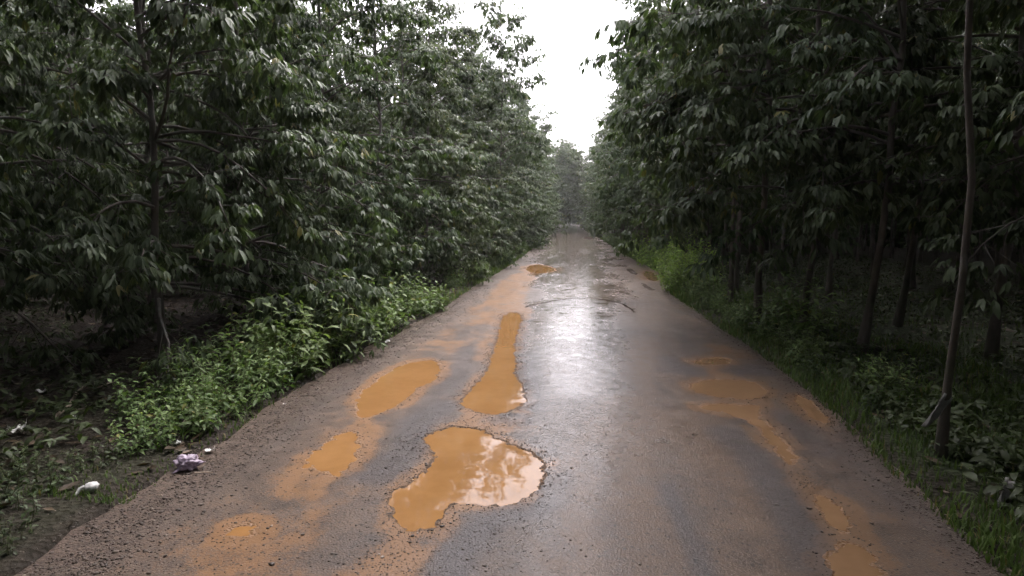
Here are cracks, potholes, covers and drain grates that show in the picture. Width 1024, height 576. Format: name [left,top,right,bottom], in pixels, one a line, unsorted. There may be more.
pothole [300,430,364,477]
pothole [793,394,830,424]
pothole [352,359,443,418]
pothole [385,425,547,532]
pothole [822,540,888,576]
pothole [458,312,528,415]
pothole [222,522,261,539]
pothole [813,494,853,534]
pothole [697,403,801,465]
pothole [525,264,557,273]
pothole [690,356,733,365]
pothole [688,378,769,400]
